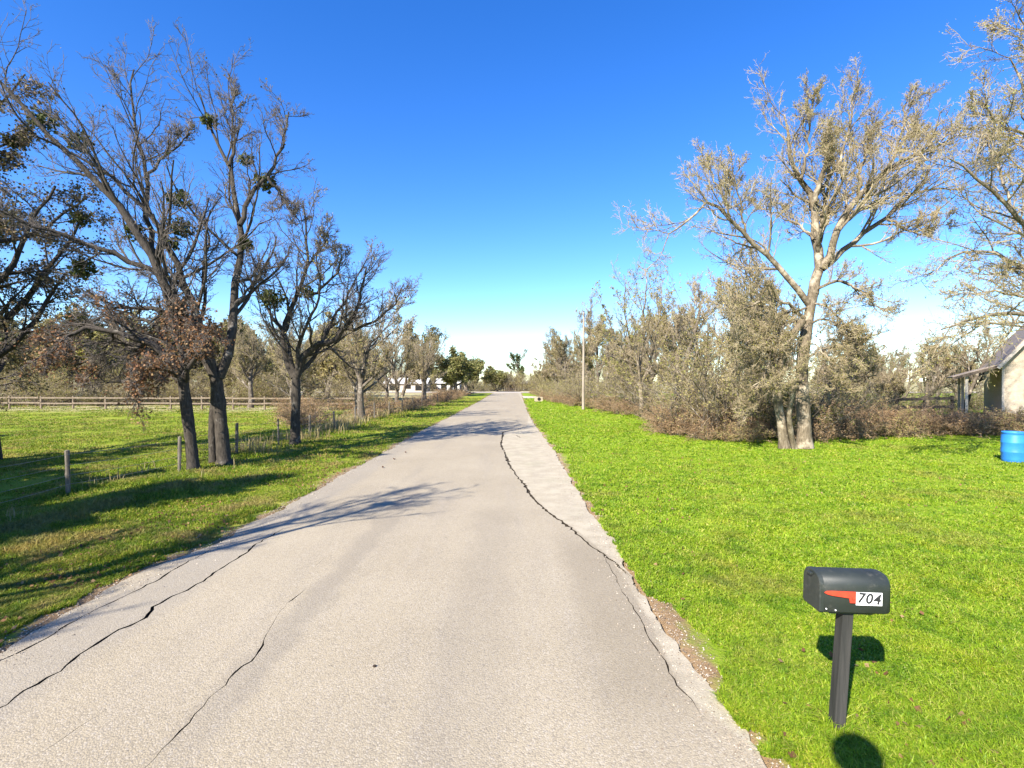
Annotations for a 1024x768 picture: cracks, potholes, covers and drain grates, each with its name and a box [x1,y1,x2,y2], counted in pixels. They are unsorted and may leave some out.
crack [146,561,321,767]
crack [500,430,700,713]
crack [0,531,279,708]
